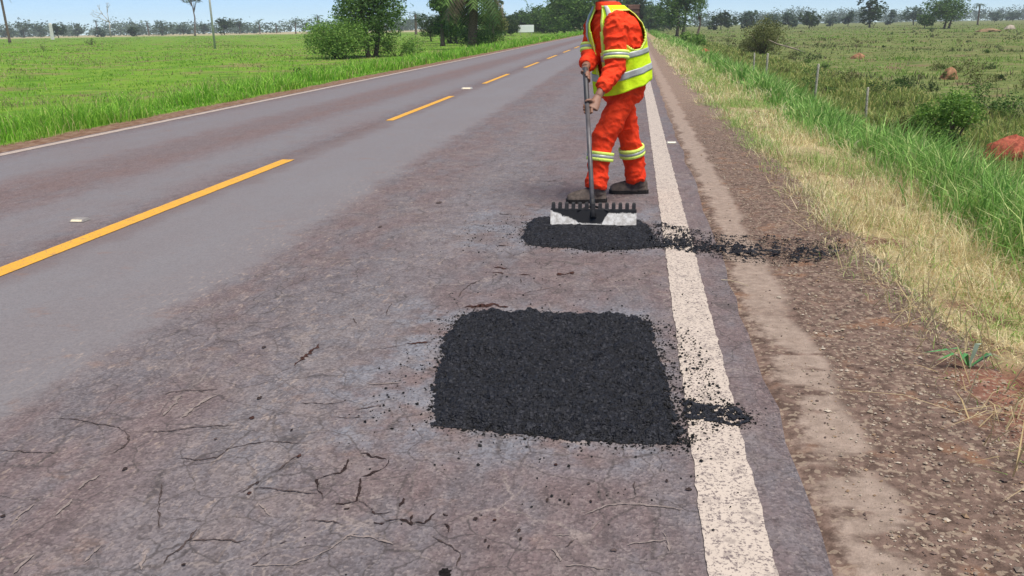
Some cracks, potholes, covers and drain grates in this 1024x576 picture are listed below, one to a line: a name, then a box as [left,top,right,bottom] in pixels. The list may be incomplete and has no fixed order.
crack [157,483,286,565]
crack [64,418,227,452]
crack [186,441,461,566]
